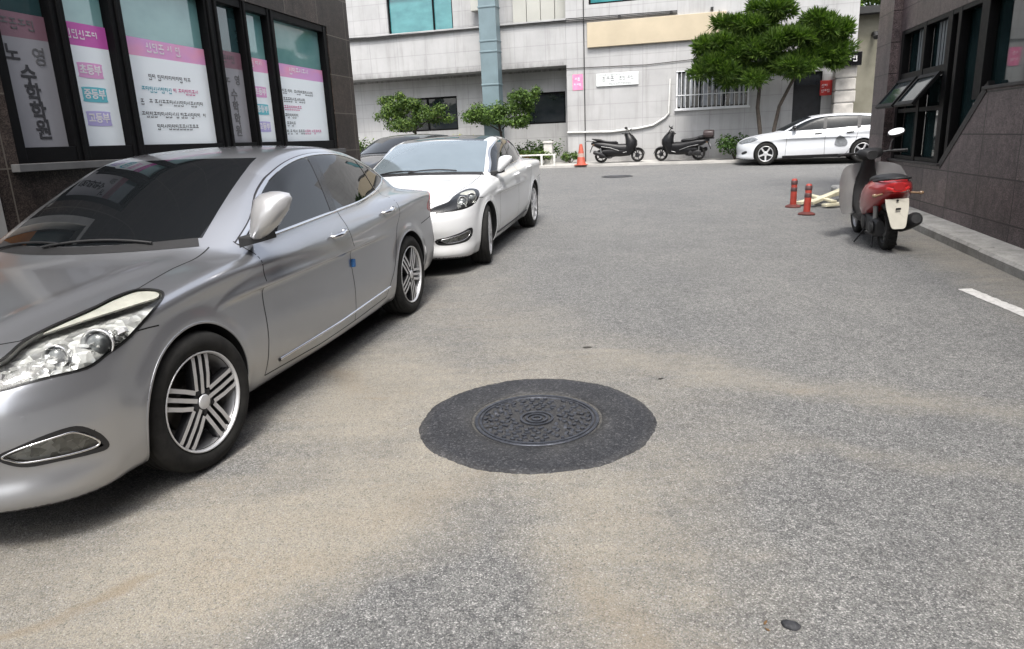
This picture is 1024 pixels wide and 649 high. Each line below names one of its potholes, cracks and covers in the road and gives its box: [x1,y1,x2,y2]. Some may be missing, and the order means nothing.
manhole cover [472,394,602,446]
